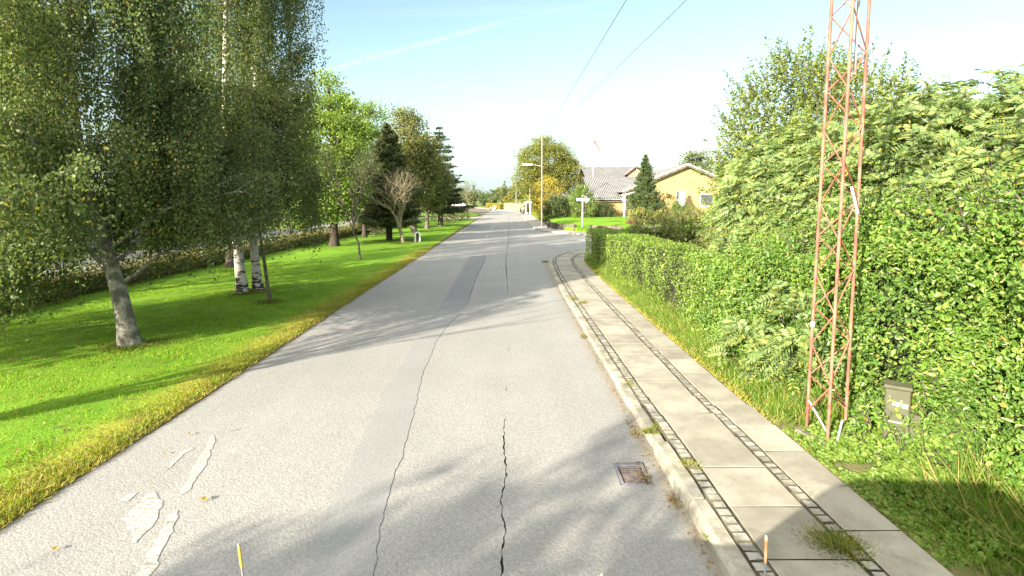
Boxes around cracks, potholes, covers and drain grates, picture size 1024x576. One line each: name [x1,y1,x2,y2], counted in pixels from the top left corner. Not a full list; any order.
crack [500,418,508,576]
drain grate [613,463,653,486]
crack [373,316,458,575]
